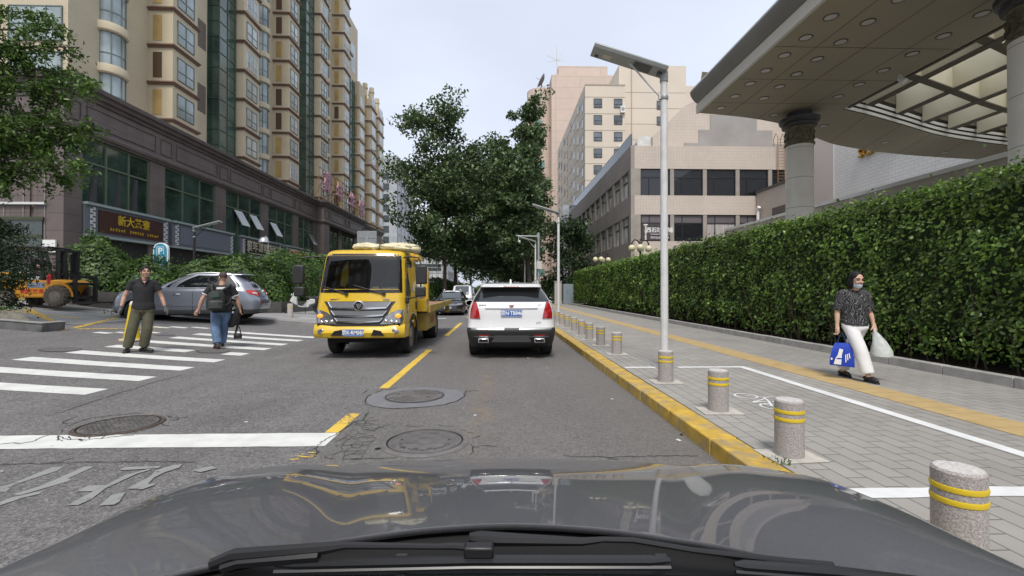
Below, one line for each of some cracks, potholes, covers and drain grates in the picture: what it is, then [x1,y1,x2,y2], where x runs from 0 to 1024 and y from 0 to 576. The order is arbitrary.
manhole cover [68,415,167,437]
manhole cover [366,387,464,408]
manhole cover [380,428,469,457]
crack [2,388,688,465]
crack [52,376,184,433]
